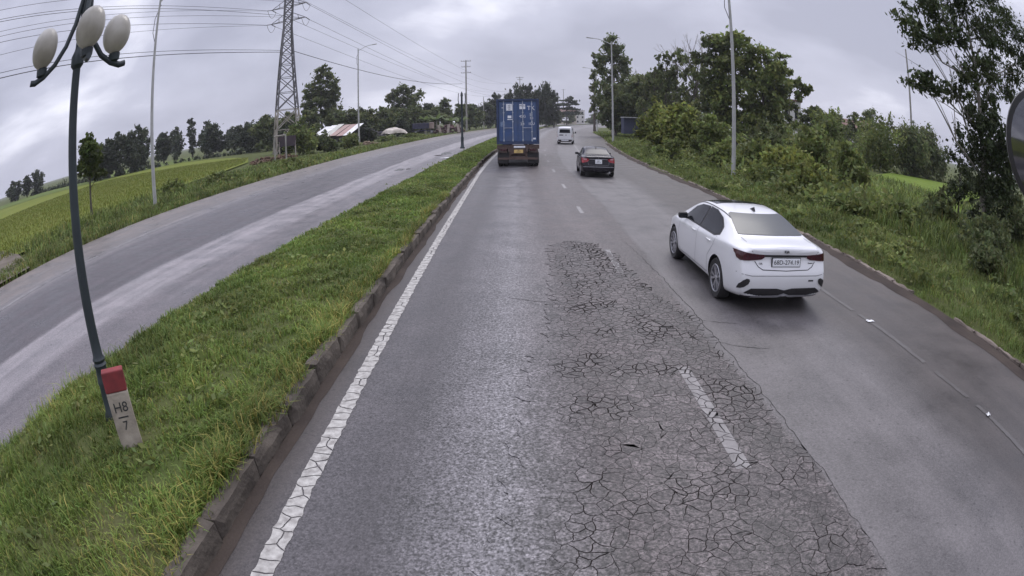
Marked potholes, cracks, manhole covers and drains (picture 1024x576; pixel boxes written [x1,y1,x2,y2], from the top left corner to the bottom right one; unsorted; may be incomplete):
crack [471,241,887,576]
